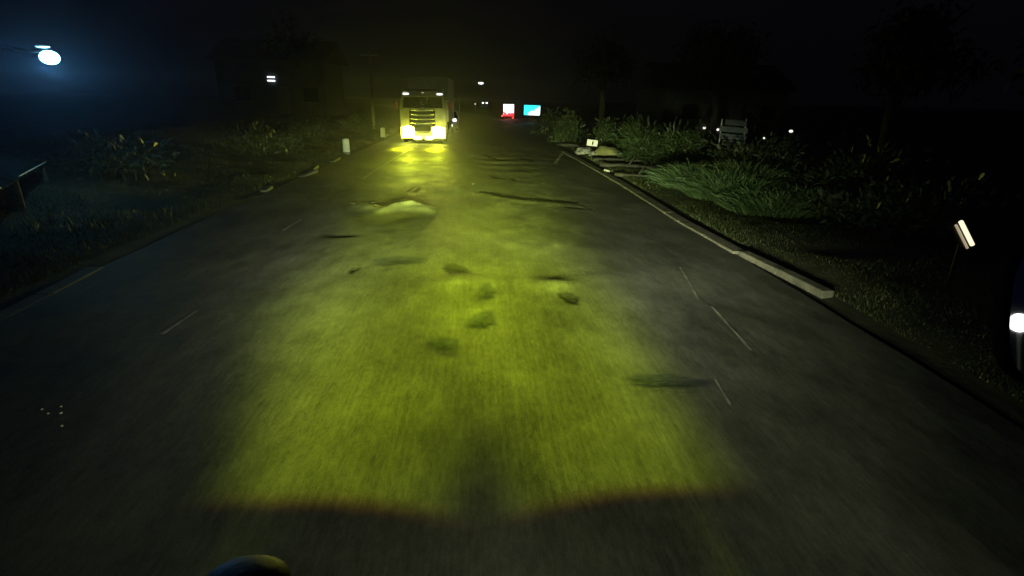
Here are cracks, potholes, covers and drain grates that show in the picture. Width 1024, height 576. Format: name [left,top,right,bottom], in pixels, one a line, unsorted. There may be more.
pothole [345,265,363,276]
crack [479,154,587,210]
pothole [333,205,443,229]
pothole [458,306,503,334]
pothole [472,279,501,303]
pothole [361,253,440,269]
pothole [417,332,466,362]
pothole [437,260,476,277]
pothole [553,289,584,309]
pothole [608,370,738,392]
